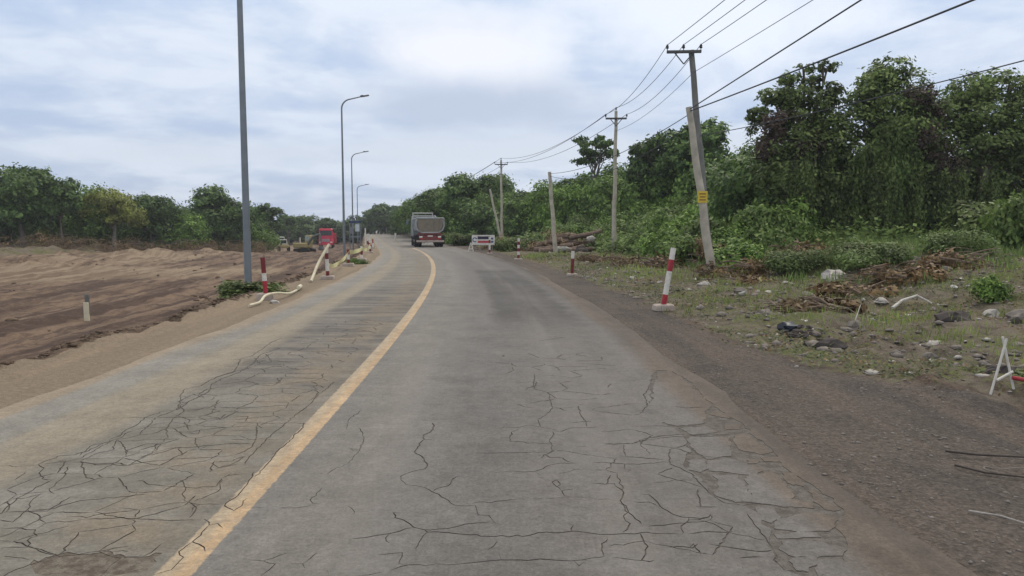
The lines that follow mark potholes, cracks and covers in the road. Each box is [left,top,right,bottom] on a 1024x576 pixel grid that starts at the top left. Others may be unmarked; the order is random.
crack [0,320,385,576]
crack [354,353,848,576]
